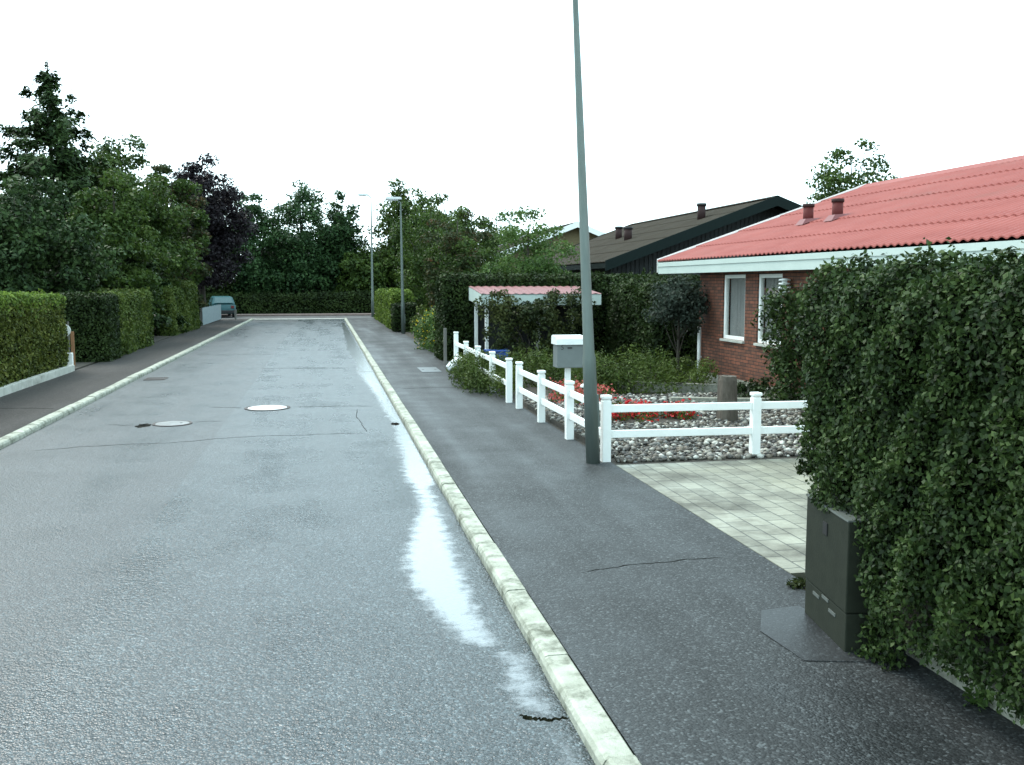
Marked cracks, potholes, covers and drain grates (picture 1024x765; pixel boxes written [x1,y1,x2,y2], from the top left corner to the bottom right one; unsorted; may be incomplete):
crack [23,407,367,452]
crack [587,557,723,572]
crack [519,714,568,722]
